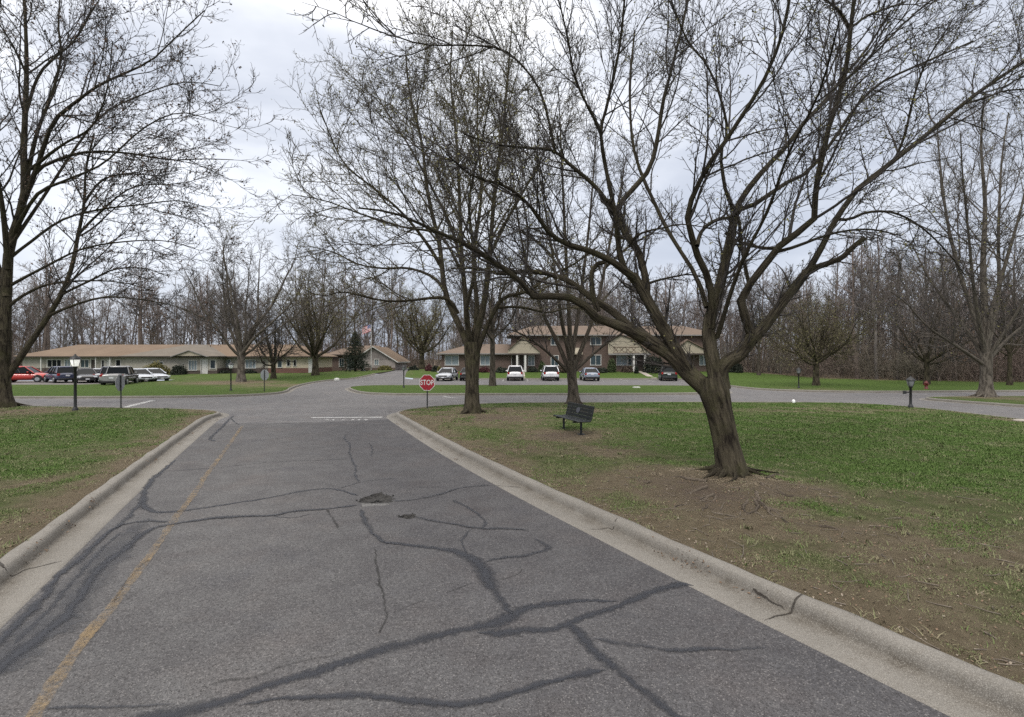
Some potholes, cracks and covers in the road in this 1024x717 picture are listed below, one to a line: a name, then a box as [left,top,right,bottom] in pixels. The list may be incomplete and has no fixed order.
pothole [356,492,394,507]
crack [752,588,802,621]
